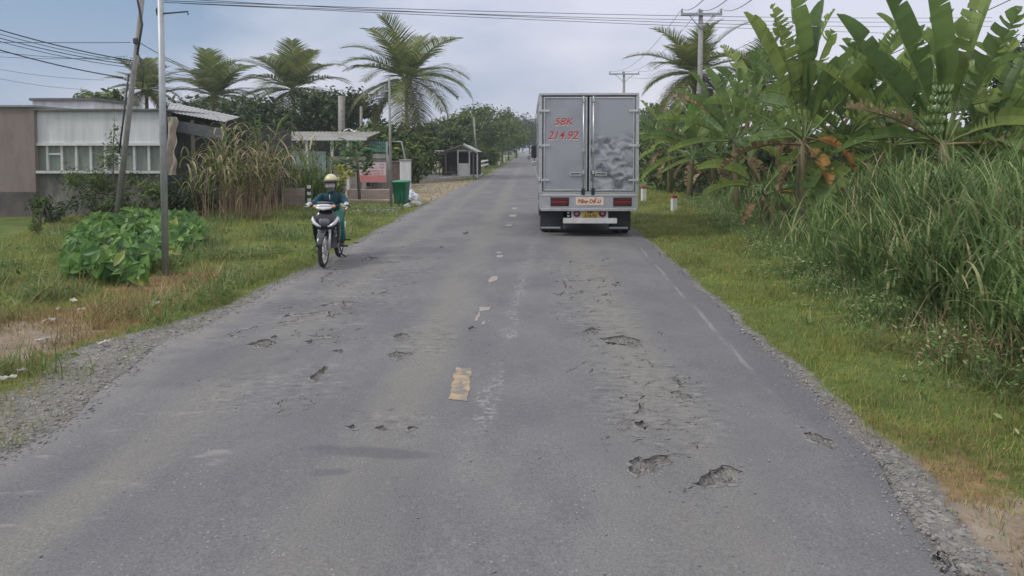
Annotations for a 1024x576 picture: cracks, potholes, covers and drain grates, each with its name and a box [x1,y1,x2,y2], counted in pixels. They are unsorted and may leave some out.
crack [550,258,717,493]
pothole [594,335,644,348]
pothole [691,464,742,488]
pothole [387,350,414,361]
pothole [801,431,839,449]
pothole [307,366,328,382]
pothole [248,339,278,348]
pothole [625,454,673,478]
pothole [632,420,648,432]
